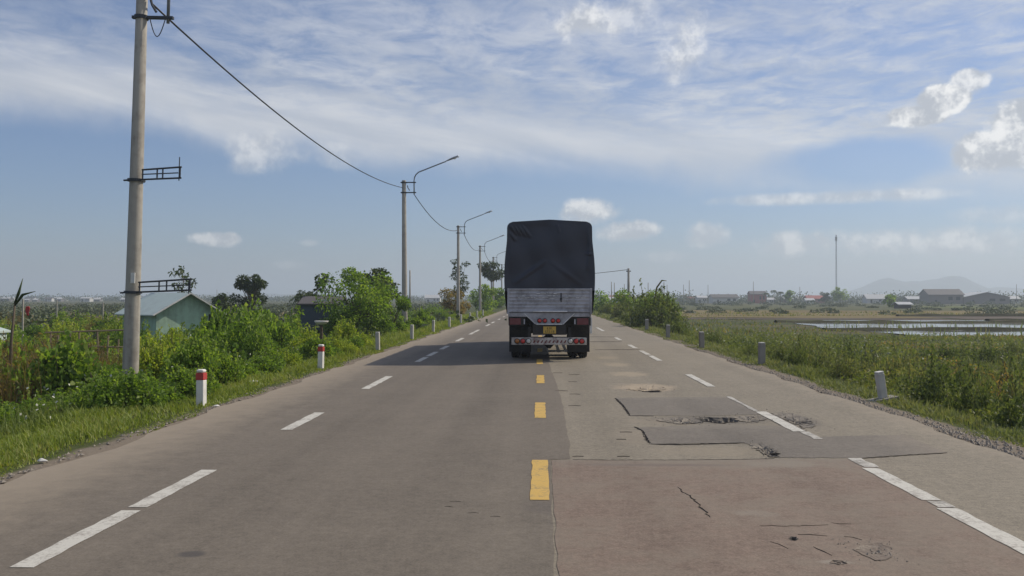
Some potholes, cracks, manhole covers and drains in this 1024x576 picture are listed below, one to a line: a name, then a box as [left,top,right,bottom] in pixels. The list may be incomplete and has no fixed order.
pothole [742,440,781,459]
pothole [689,416,752,425]
pothole [717,413,781,424]
pothole [767,410,830,431]
pothole [646,416,709,426]
crack [767,523,861,555]
